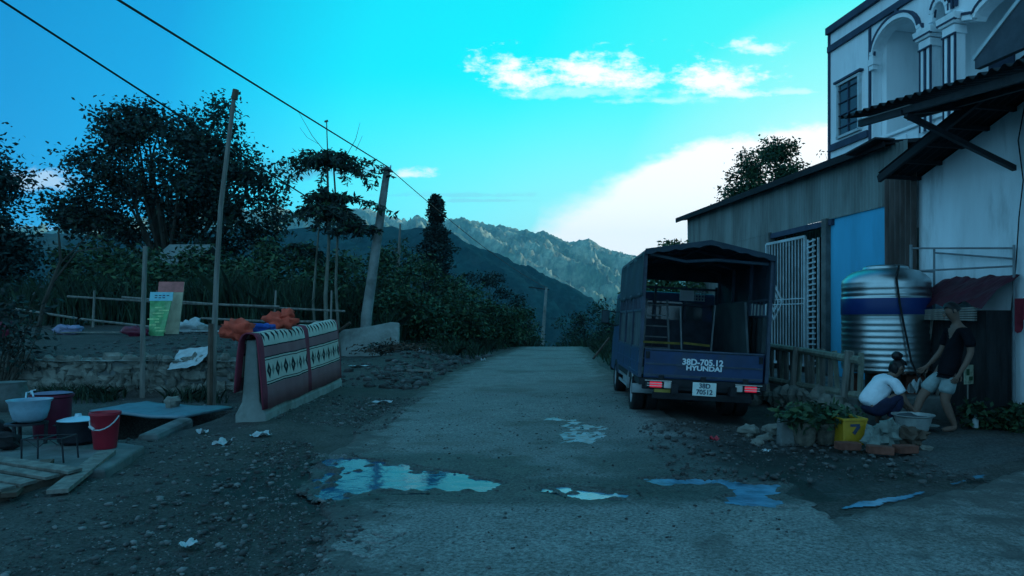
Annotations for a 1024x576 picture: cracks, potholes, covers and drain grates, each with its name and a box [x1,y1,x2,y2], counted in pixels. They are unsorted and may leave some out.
pothole [530,483,644,501]
pothole [295,453,505,502]
pothole [632,473,817,508]
